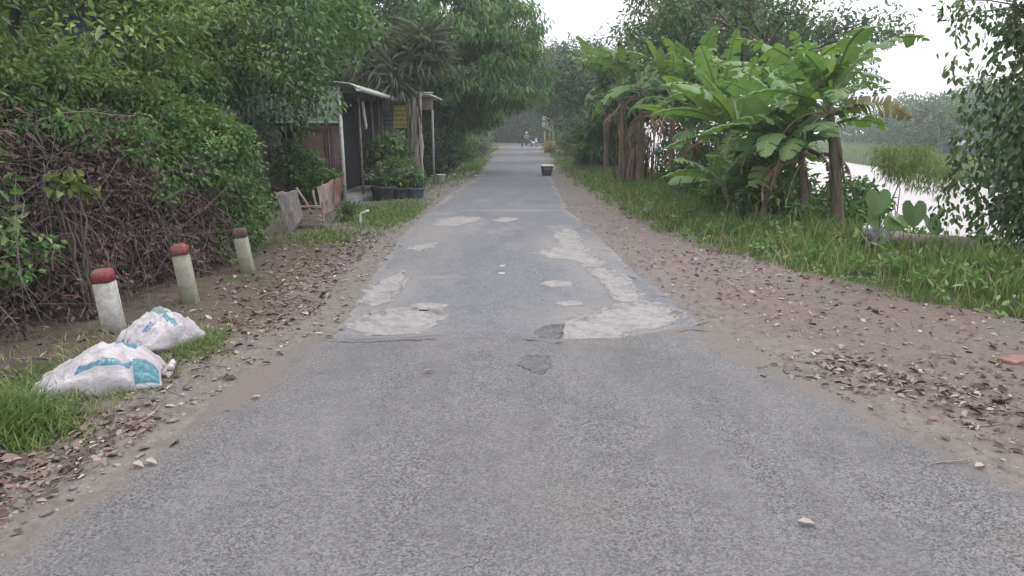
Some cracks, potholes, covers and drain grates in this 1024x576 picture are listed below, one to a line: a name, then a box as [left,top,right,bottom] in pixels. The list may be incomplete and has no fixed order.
pothole [535,324,564,339]
pothole [517,353,551,374]
